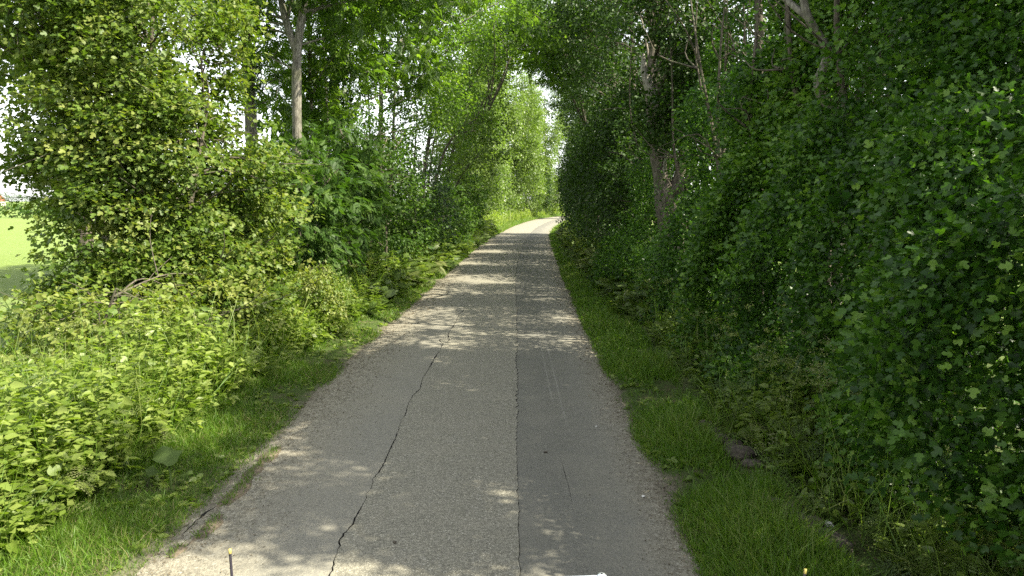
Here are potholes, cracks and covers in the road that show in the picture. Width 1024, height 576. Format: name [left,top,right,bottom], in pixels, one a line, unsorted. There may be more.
crack [182,507,215,546]
crack [328,305,465,576]
